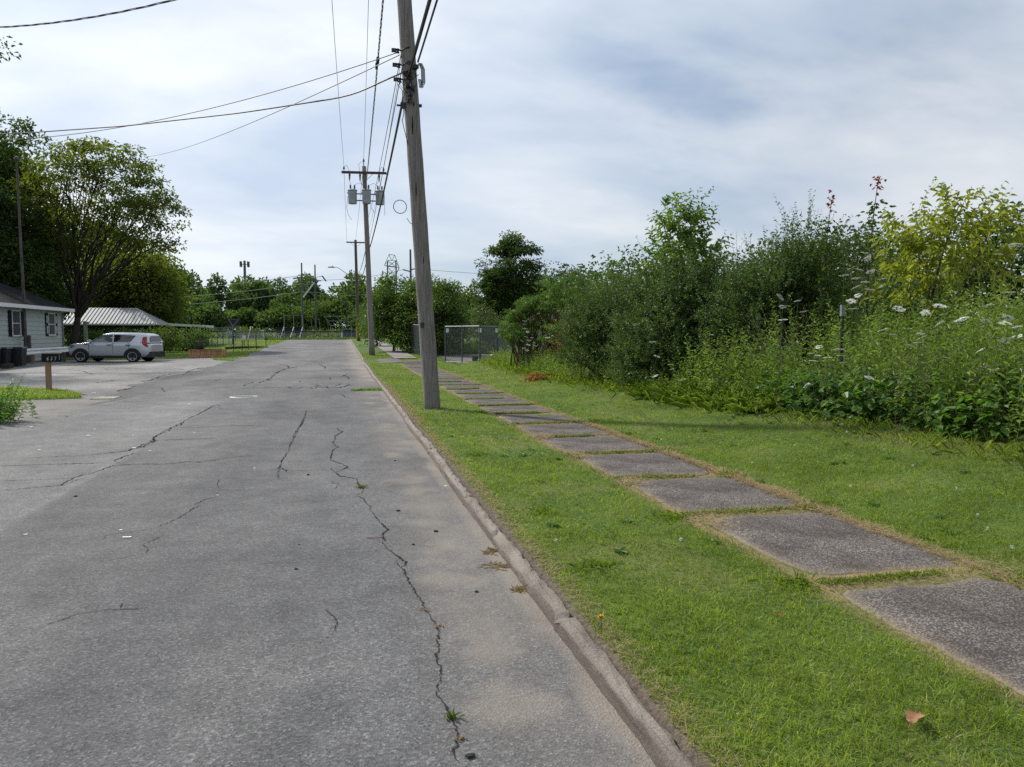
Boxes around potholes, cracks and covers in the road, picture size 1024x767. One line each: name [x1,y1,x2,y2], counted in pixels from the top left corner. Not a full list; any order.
crack [93,480,249,559]
crack [330,428,459,761]
crack [277,411,309,478]
